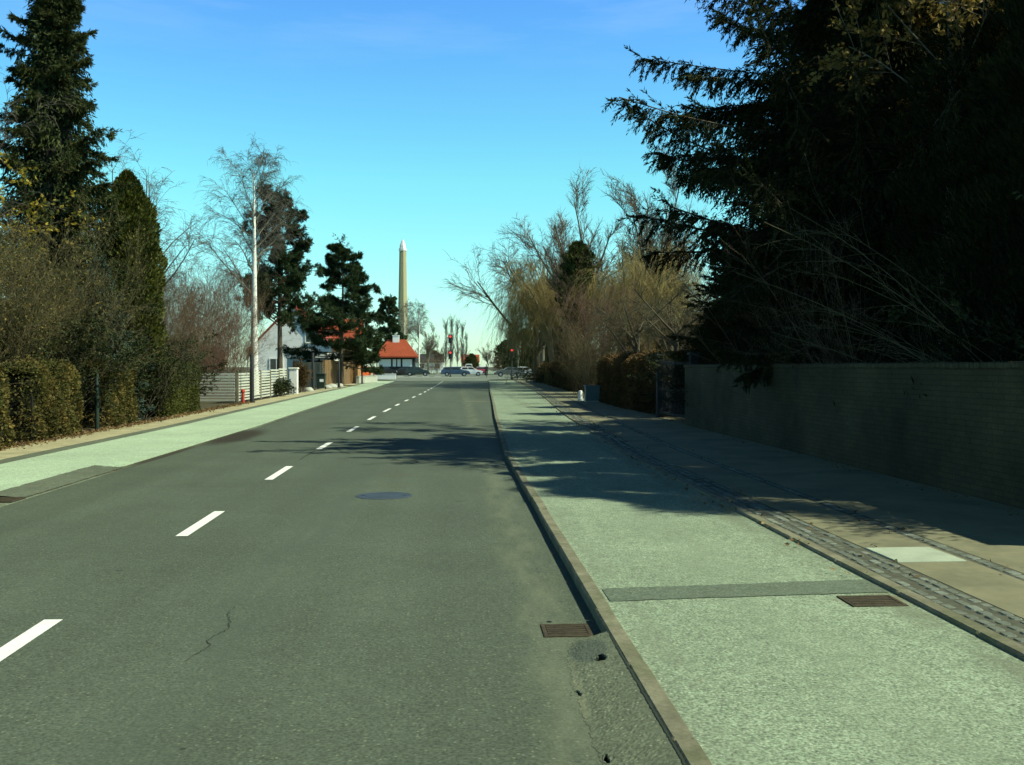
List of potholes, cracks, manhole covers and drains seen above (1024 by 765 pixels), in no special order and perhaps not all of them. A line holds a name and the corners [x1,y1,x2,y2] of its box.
crack [186,606,235,661]
drain grate [540,623,594,638]
drain grate [836,595,909,607]
manhole cover [355,492,413,500]
